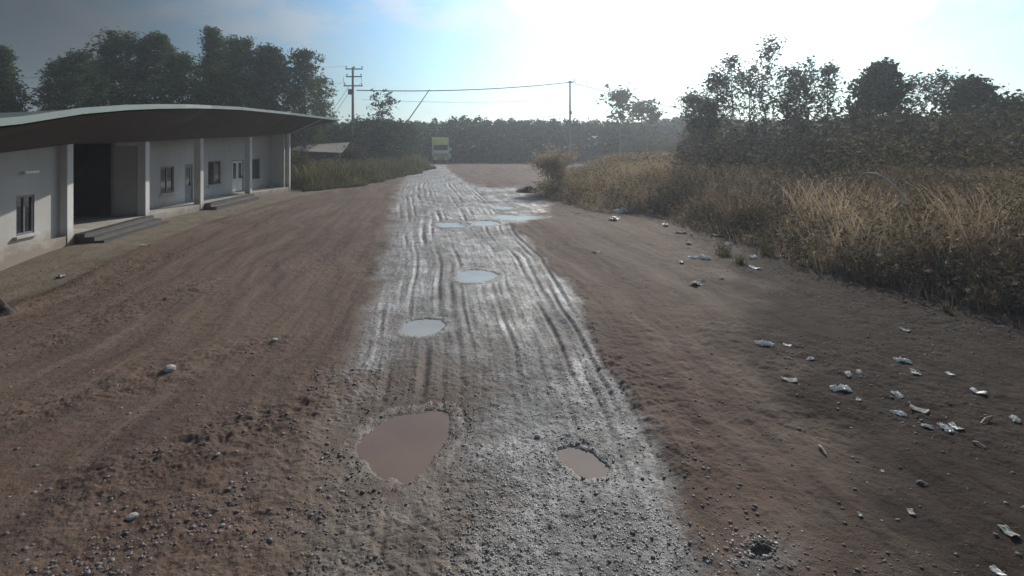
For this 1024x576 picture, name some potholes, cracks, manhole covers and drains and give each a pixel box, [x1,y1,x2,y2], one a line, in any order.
pothole [550,441,618,486]
pothole [336,401,467,497]
pothole [747,543,773,560]
pothole [448,268,506,285]
pothole [393,315,453,339]
